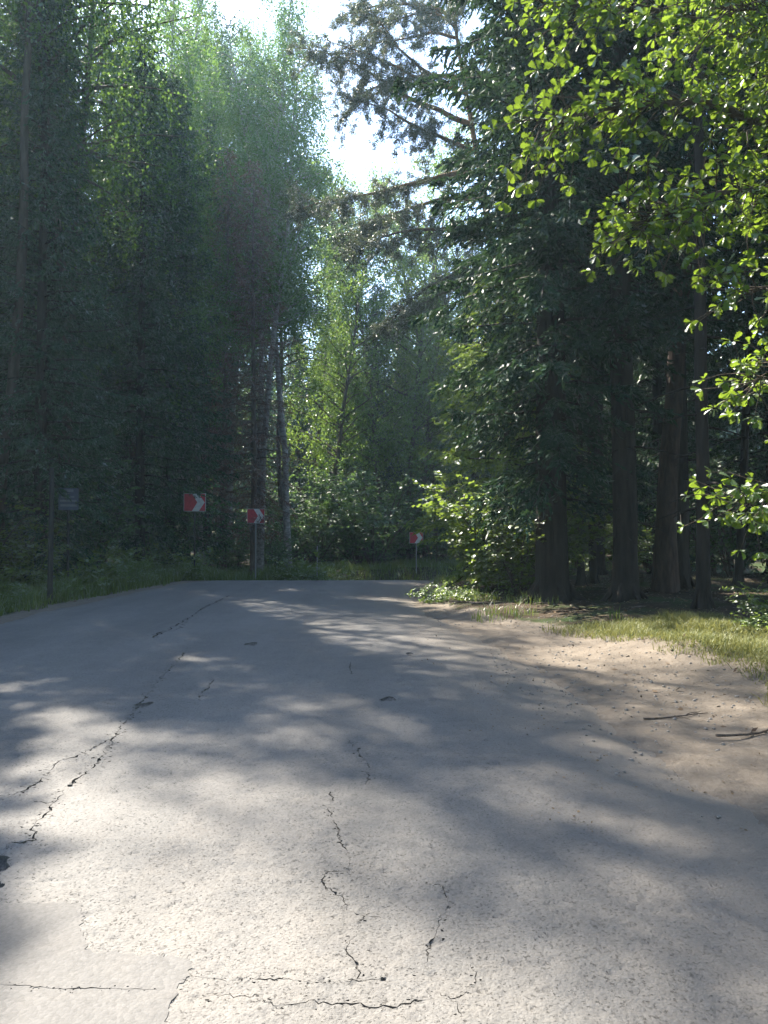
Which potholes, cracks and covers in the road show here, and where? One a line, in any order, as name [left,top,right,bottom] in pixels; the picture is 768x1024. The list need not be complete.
crack [0,652,187,849]
crack [2,984,157,993]
crack [180,792,482,1015]
